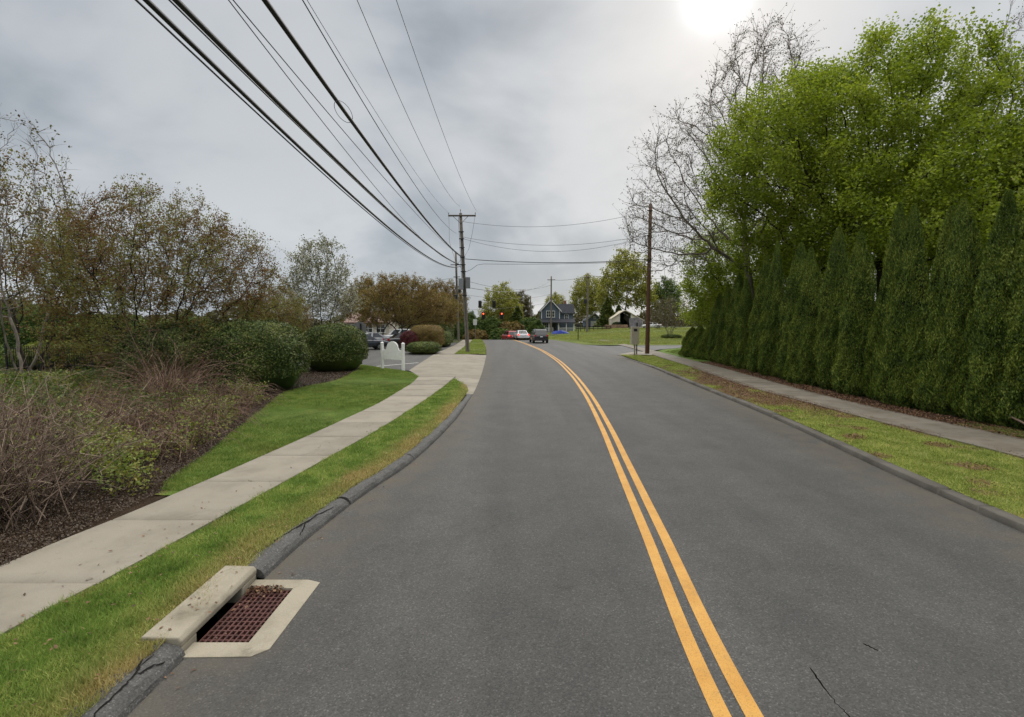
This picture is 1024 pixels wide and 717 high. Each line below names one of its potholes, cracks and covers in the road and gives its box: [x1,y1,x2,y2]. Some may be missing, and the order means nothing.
crack [810,668,850,717]
crack [94,654,165,717]
drain grate [141,566,320,659]
crack [274,497,351,541]
